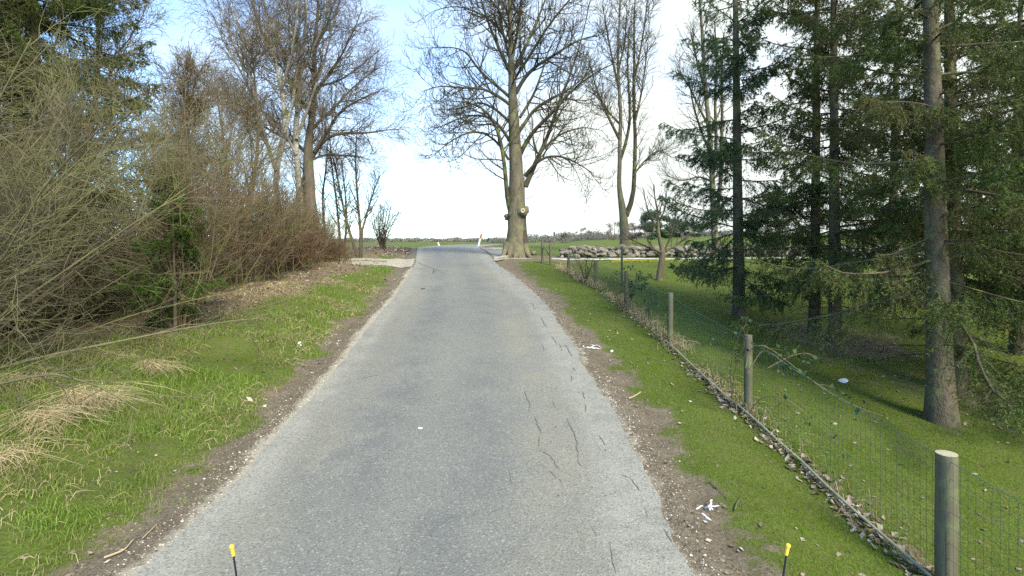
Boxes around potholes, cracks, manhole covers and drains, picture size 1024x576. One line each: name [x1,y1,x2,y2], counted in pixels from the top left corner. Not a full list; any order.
crack [525,305,586,481]
